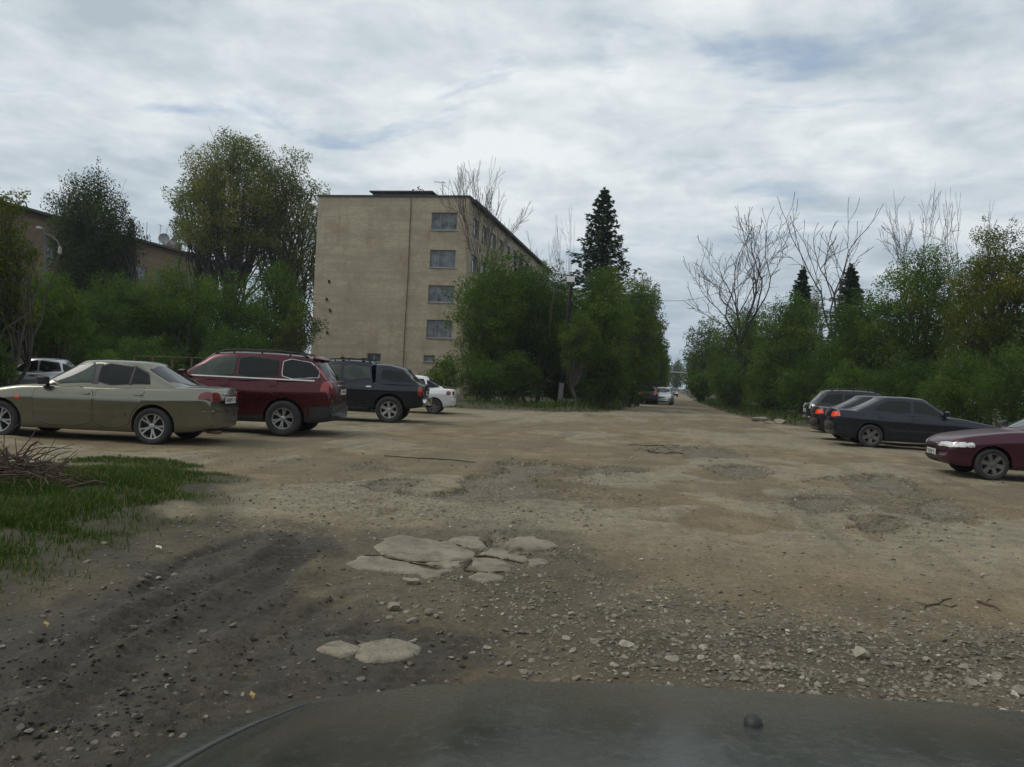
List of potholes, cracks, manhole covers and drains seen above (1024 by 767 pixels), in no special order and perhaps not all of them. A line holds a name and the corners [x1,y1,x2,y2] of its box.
crack [365,539,524,573]
pothole [673,445,749,458]
pothole [898,499,978,522]
pothole [782,495,854,514]
crack [384,455,476,463]
pothole [636,445,694,455]
pothole [397,461,573,503]
pothole [823,475,922,499]
pothole [845,512,908,533]
pothole [698,465,777,480]
pothole [575,465,643,475]
pothole [358,477,420,492]
